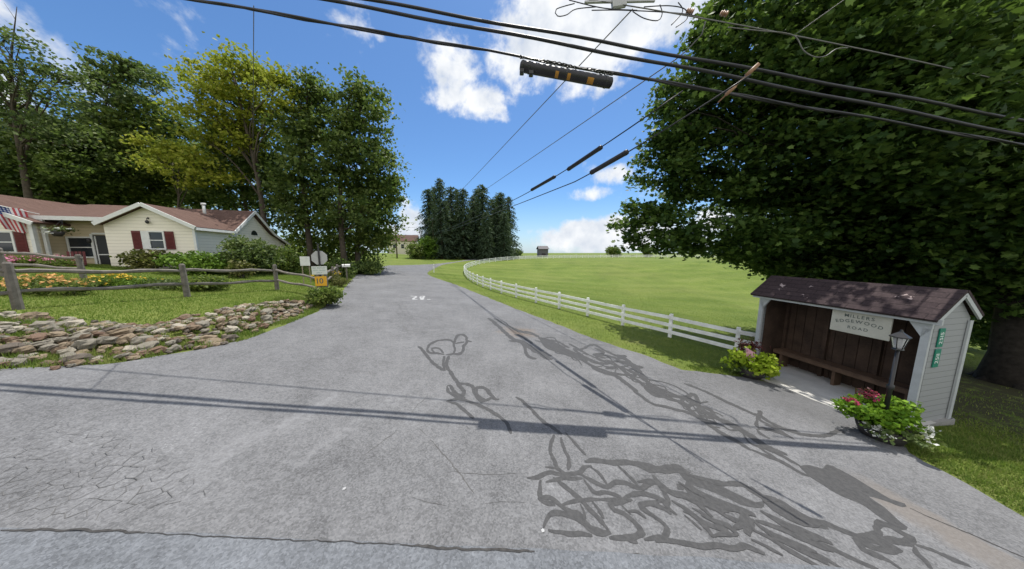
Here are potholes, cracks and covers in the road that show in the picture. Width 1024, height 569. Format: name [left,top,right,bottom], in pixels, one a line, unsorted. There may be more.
crack [406,429,518,506]
